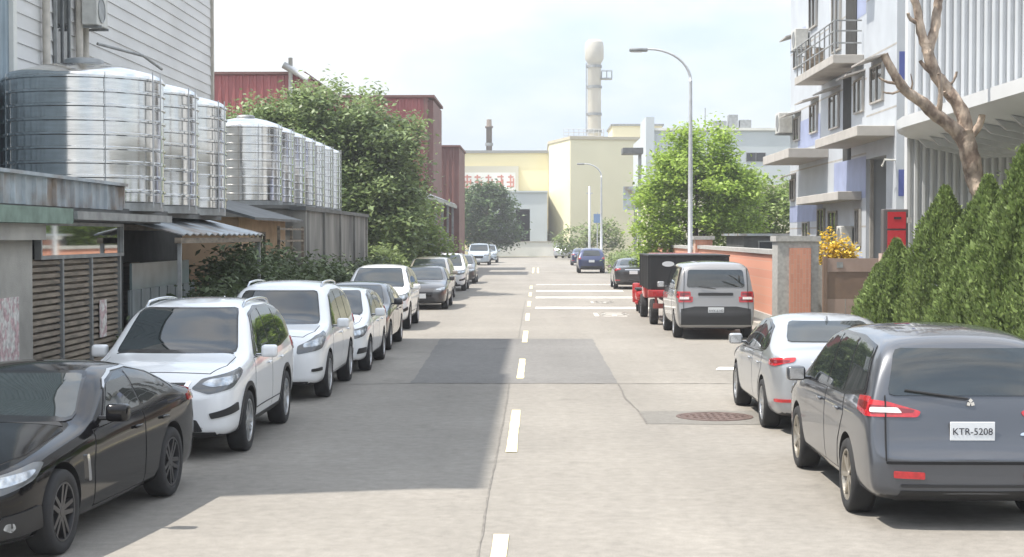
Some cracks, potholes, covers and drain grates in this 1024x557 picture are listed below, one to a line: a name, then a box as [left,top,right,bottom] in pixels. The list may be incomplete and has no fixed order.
manhole cover [676,412,753,421]
